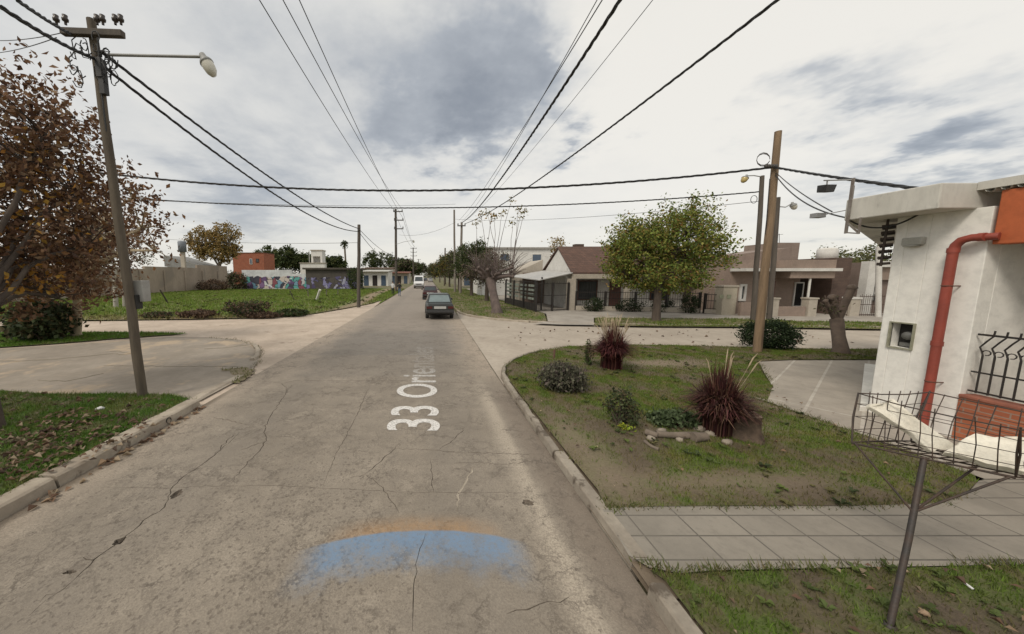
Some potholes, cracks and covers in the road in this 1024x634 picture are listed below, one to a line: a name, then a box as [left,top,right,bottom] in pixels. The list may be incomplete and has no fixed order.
crack [32,390,288,613]
crack [507,597,568,614]
crack [412,537,425,631]
